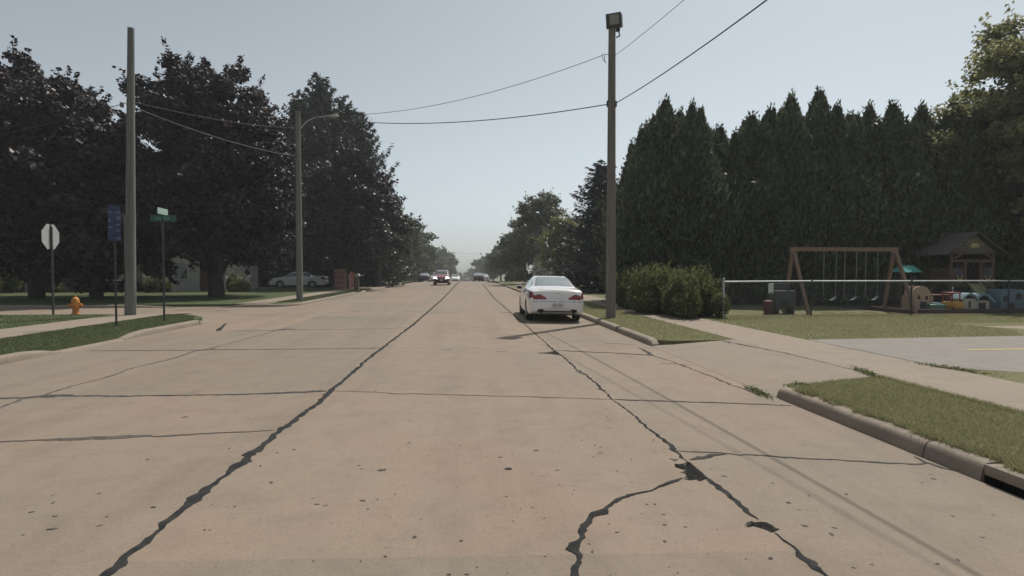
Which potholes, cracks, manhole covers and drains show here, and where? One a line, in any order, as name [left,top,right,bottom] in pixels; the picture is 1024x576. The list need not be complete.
drain grate [984,464,1024,499]
crack [639,348,762,397]
